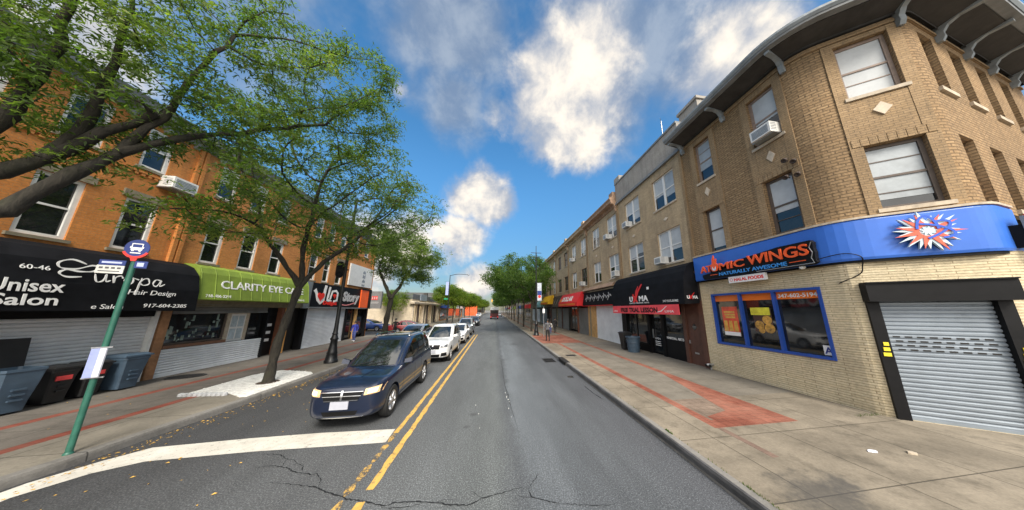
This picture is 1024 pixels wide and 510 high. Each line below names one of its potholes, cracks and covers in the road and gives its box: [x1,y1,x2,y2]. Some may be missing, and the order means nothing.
crack [272,454,614,509]
